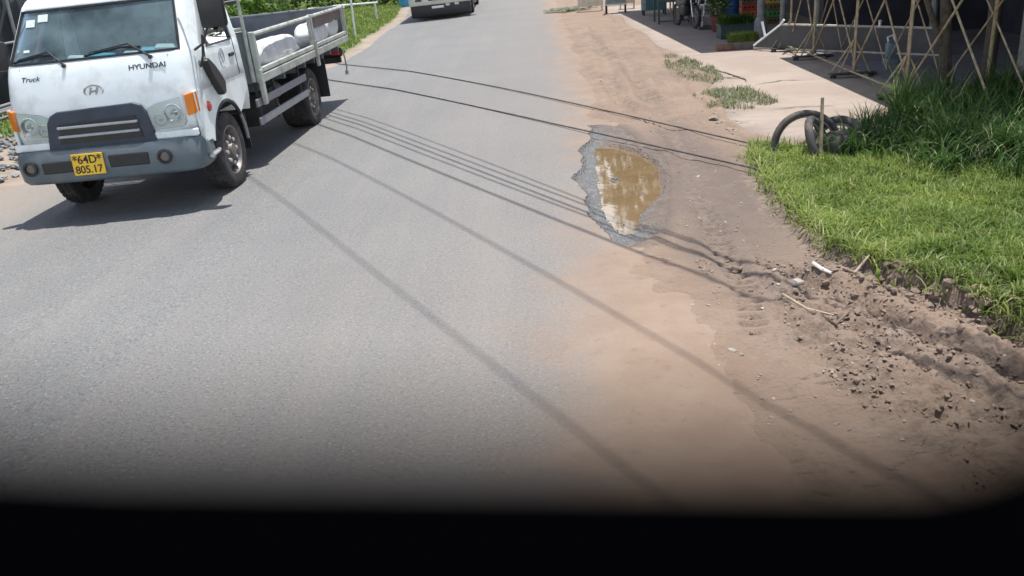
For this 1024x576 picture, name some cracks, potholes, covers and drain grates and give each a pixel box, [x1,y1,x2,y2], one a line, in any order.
pothole [571,125,671,246]
